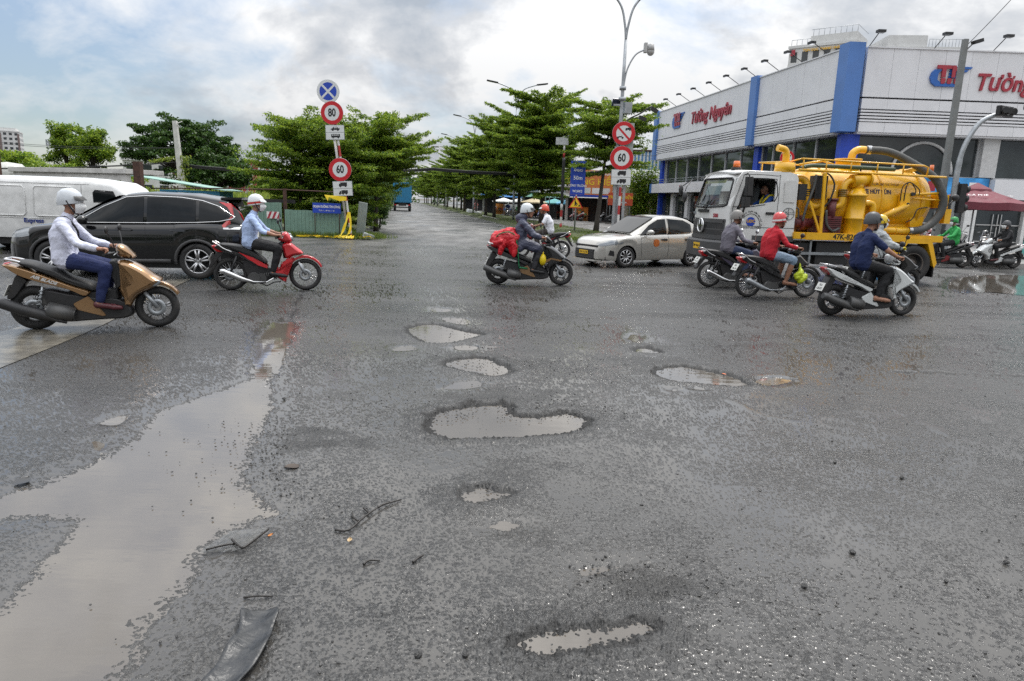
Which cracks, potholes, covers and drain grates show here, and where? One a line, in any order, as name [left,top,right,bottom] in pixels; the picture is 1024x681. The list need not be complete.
pothole [628,344,665,353]
pothole [419,397,598,441]
pothole [501,610,667,662]
pothole [402,321,488,343]
pothole [451,480,521,505]
pothole [649,362,755,388]
pothole [438,353,519,377]
